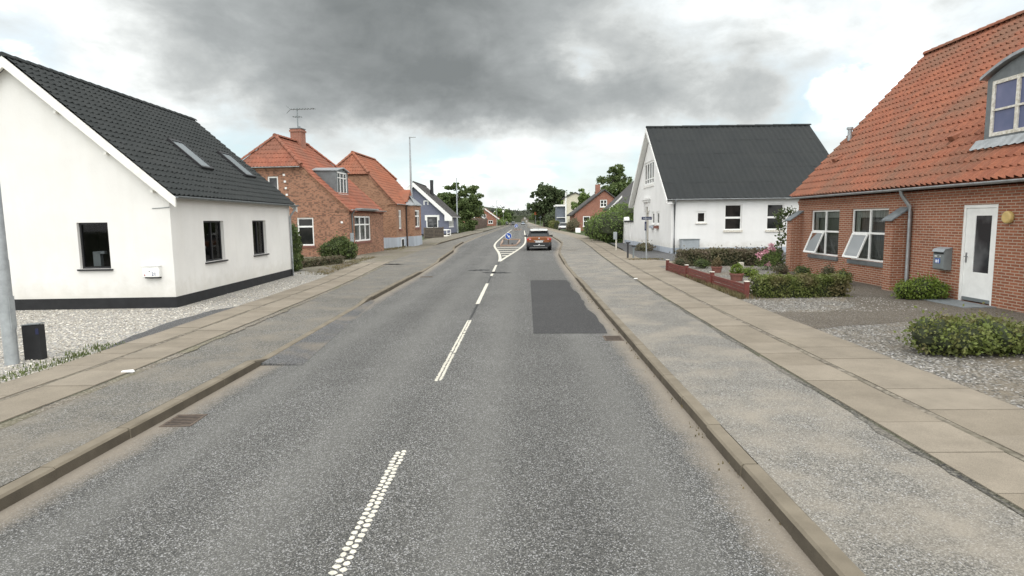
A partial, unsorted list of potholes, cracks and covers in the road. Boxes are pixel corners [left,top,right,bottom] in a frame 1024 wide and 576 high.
drain grate [159,414,208,427]
